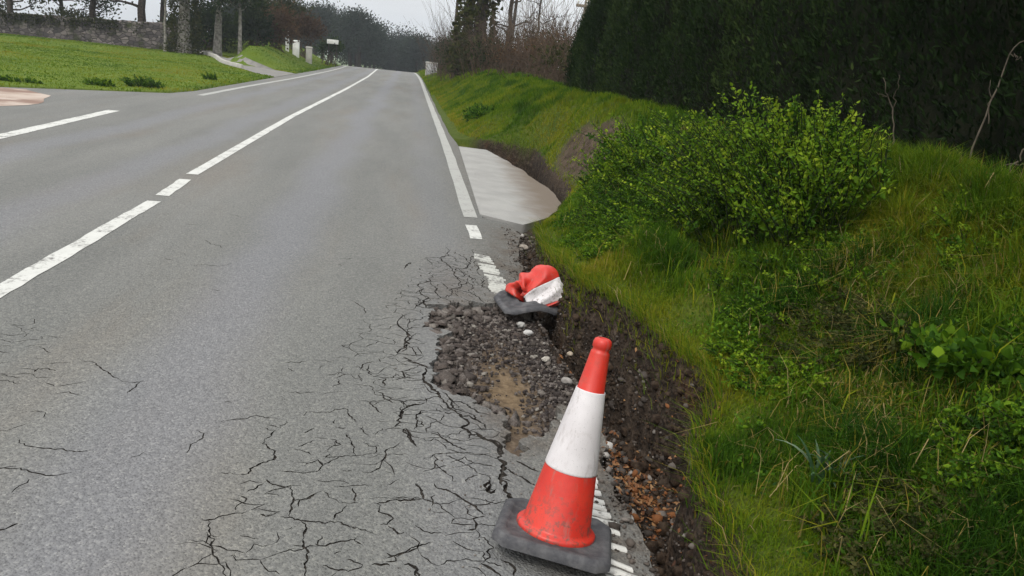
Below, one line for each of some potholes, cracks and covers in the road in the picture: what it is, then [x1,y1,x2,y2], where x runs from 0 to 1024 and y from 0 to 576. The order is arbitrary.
crack [0,319,65,491]
crack [173,248,536,576]
pothole [424,304,574,466]
